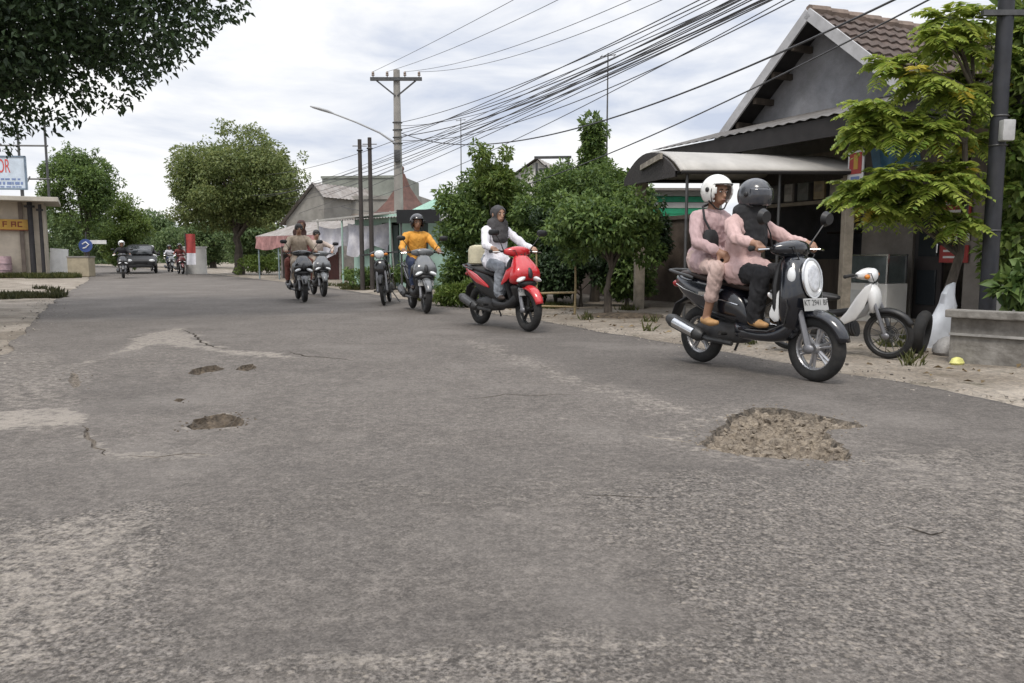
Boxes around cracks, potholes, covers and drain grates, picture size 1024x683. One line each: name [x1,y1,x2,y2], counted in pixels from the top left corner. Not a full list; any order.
pothole [188,365,243,375]
crack [907,527,943,536]
pothole [677,404,867,469]
crack [182,329,245,350]
crack [83,426,106,456]
pothole [174,412,256,432]
